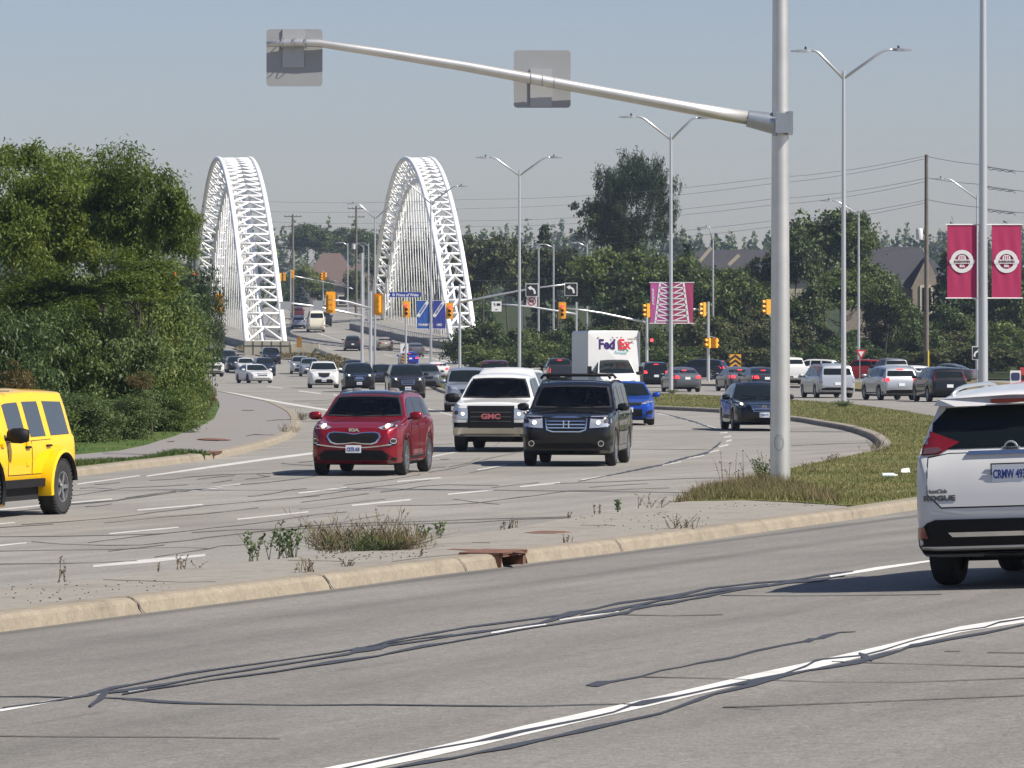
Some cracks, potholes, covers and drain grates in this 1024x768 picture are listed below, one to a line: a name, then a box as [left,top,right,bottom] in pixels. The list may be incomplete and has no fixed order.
drain grate [459,549,527,568]
